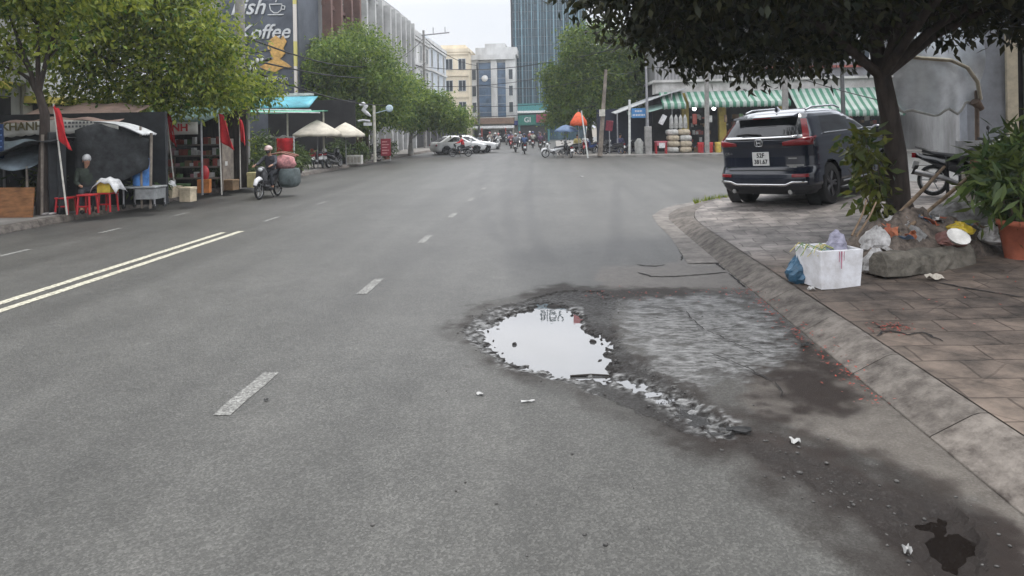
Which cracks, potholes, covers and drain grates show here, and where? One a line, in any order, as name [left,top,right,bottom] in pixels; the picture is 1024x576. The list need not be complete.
pothole [459,289,738,442]
crack [637,249,725,277]
crack [638,305,783,397]
